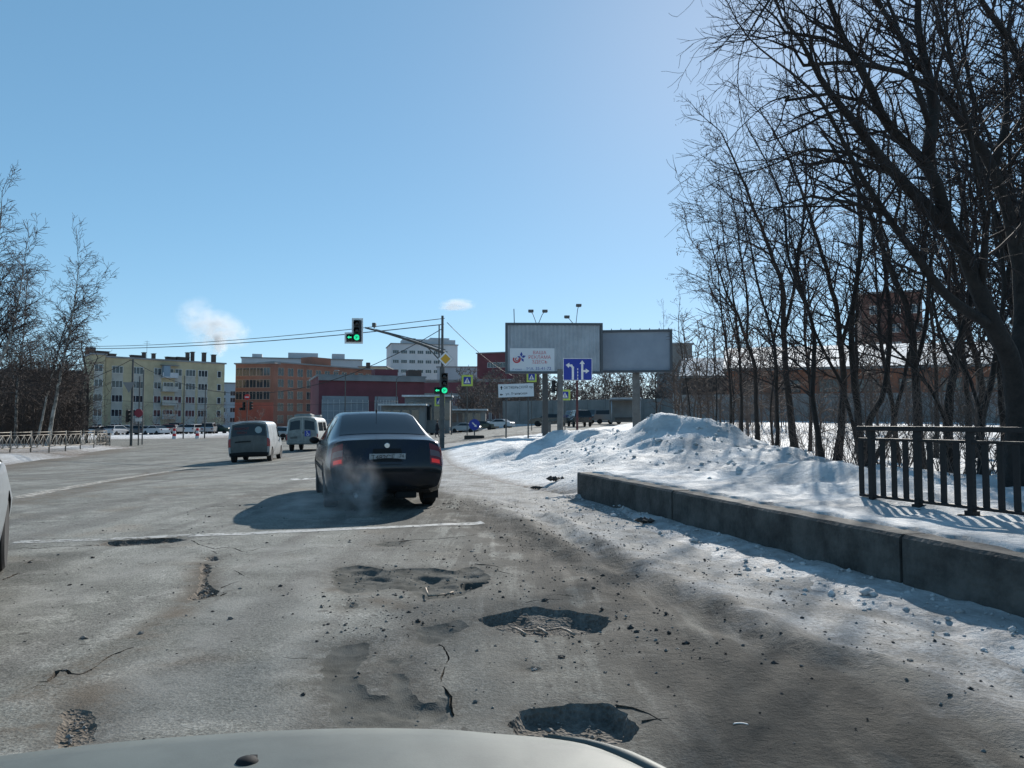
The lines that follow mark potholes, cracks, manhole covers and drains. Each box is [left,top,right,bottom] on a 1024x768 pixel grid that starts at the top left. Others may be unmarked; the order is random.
pothole [187,564,219,601]
pothole [331,565,491,600]
pothole [319,643,451,728]
crack [33,647,134,688]
pothole [95,538,184,547]
pothole [54,709,97,748]
crack [438,644,454,716]
pothole [477,606,612,636]
pothole [507,703,639,745]
